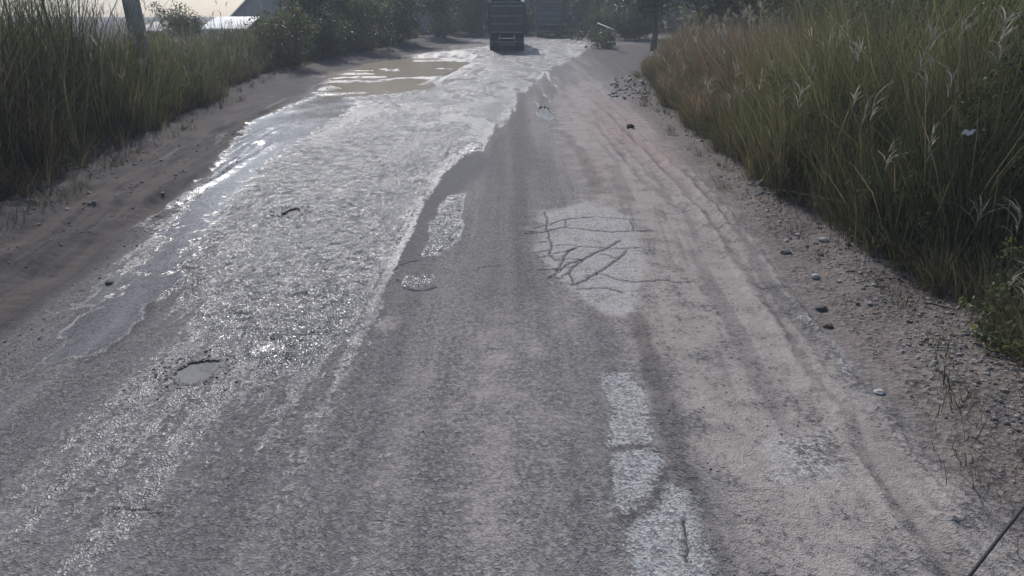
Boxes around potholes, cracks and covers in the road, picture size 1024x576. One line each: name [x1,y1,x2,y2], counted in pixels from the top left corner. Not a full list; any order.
pothole [536,105,556,121]
pothole [168,357,226,387]
crack [539,214,689,293]
